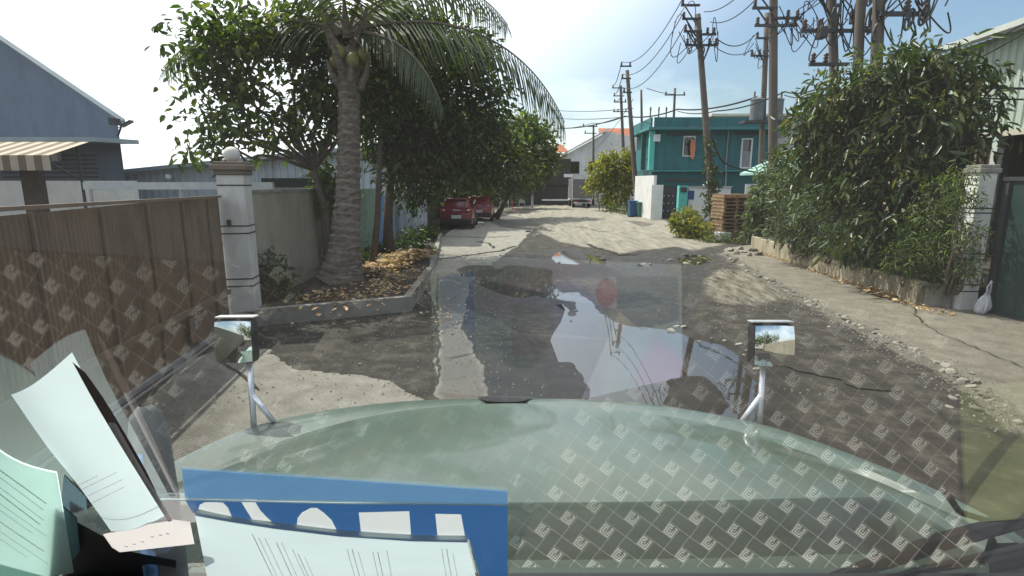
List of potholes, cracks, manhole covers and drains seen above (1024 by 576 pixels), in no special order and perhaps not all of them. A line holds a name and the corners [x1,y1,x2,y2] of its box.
crack [913,307,1023,367]
pothole [602,248,717,279]
crack [788,366,897,390]
pothole [539,301,575,362]
